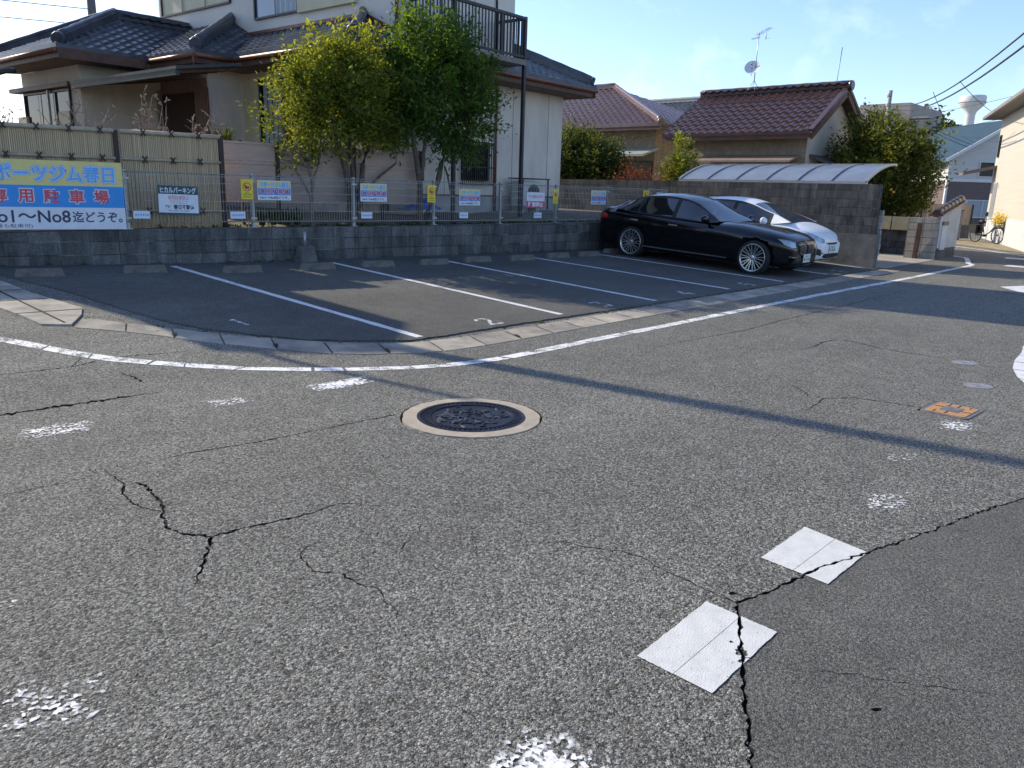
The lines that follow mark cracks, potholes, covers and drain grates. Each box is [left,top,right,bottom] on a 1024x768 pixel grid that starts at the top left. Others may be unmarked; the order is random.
crack [806,340,989,367]
crack [532,498,1024,768]
crack [89,466,389,586]
manhole cover [400,398,542,439]
crack [794,386,921,411]
crack [300,526,478,625]
manhole cover [920,402,983,421]
